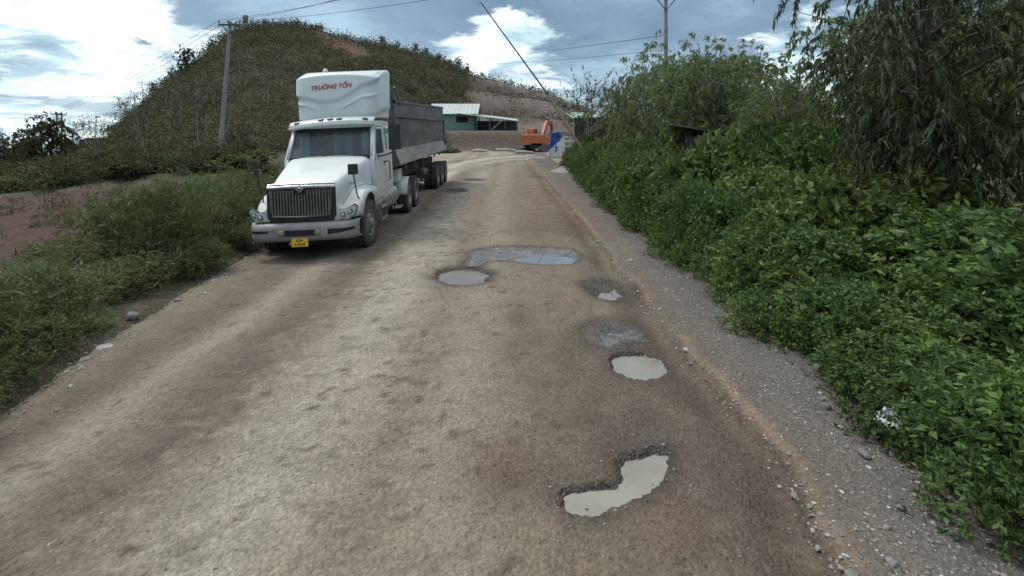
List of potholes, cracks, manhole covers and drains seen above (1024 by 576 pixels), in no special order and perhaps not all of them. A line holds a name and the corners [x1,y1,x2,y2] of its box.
pothole [462,246,581,267]
pothole [604,350,669,382]
pothole [573,316,649,350]
pothole [432,266,495,285]
pothole [555,443,679,528]
pothole [580,277,628,301]
